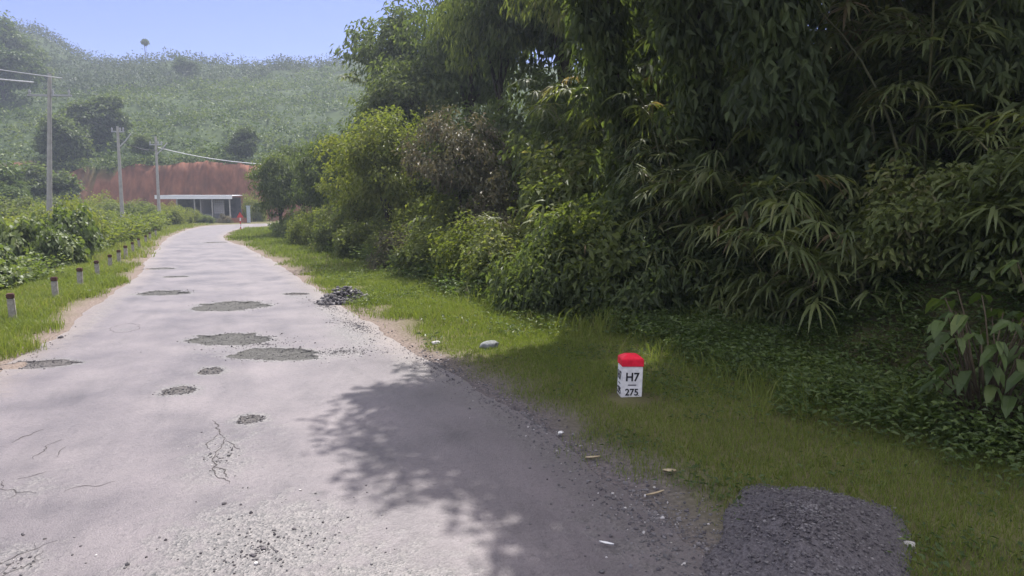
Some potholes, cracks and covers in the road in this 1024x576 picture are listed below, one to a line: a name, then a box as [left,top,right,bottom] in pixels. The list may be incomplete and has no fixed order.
crack [1,540,58,576]
crack [1,429,65,499]
pothole [177,332,276,347]
pothole [152,385,200,396]
crack [205,421,240,483]
pothole [188,300,278,311]
pothole [222,348,323,363]
pothole [236,414,266,424]
pothole [197,367,224,375]
pothole [0,359,83,370]
